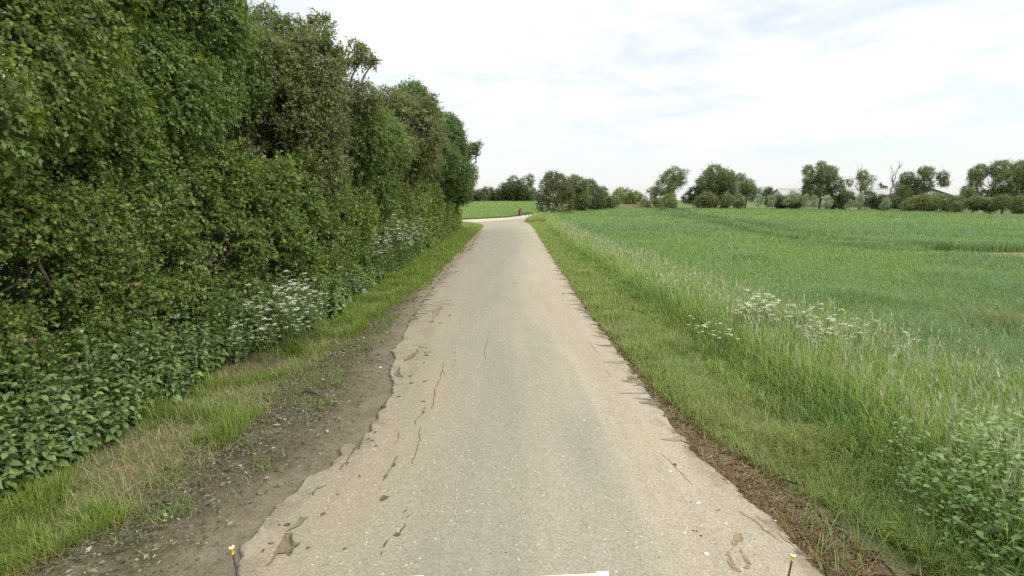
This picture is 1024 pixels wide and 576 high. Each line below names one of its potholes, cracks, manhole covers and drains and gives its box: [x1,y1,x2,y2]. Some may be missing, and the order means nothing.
crack [739,511,815,566]
crack [383,346,455,481]
pothole [266,532,301,565]
crack [445,471,461,559]
